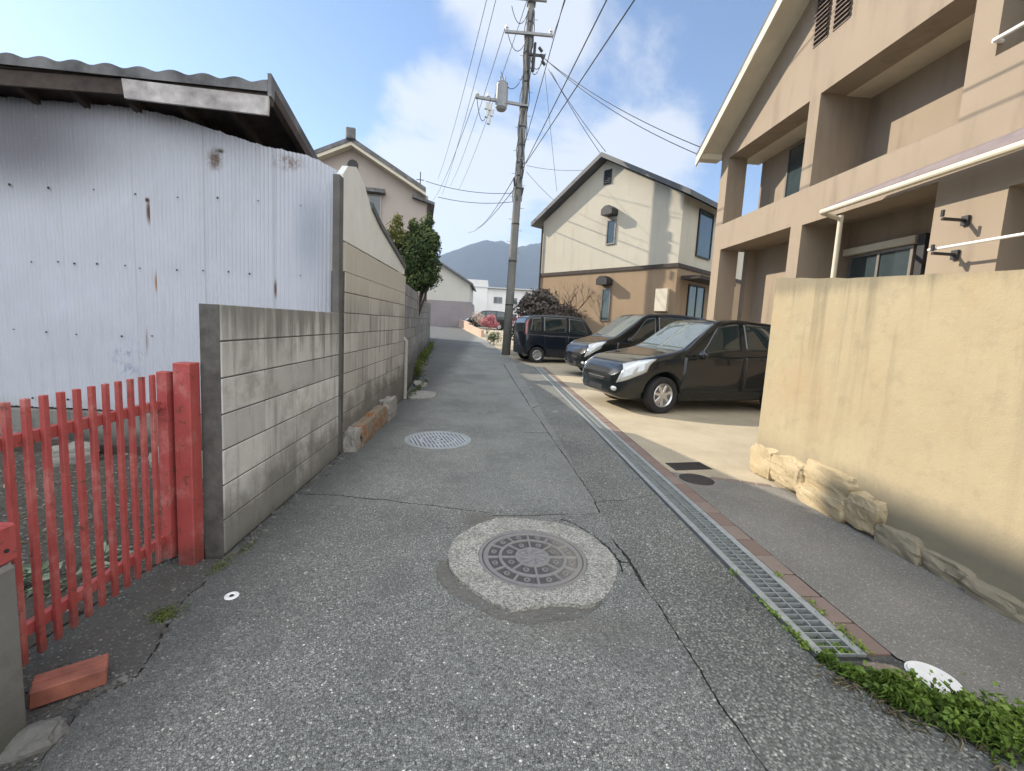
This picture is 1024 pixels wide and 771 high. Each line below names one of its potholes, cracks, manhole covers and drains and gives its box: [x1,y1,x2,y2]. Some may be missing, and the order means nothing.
manhole cover [679,473,714,487]
manhole cover [448,517,617,613]
drain grate [534,367,867,657]
crack [560,519,768,771]
